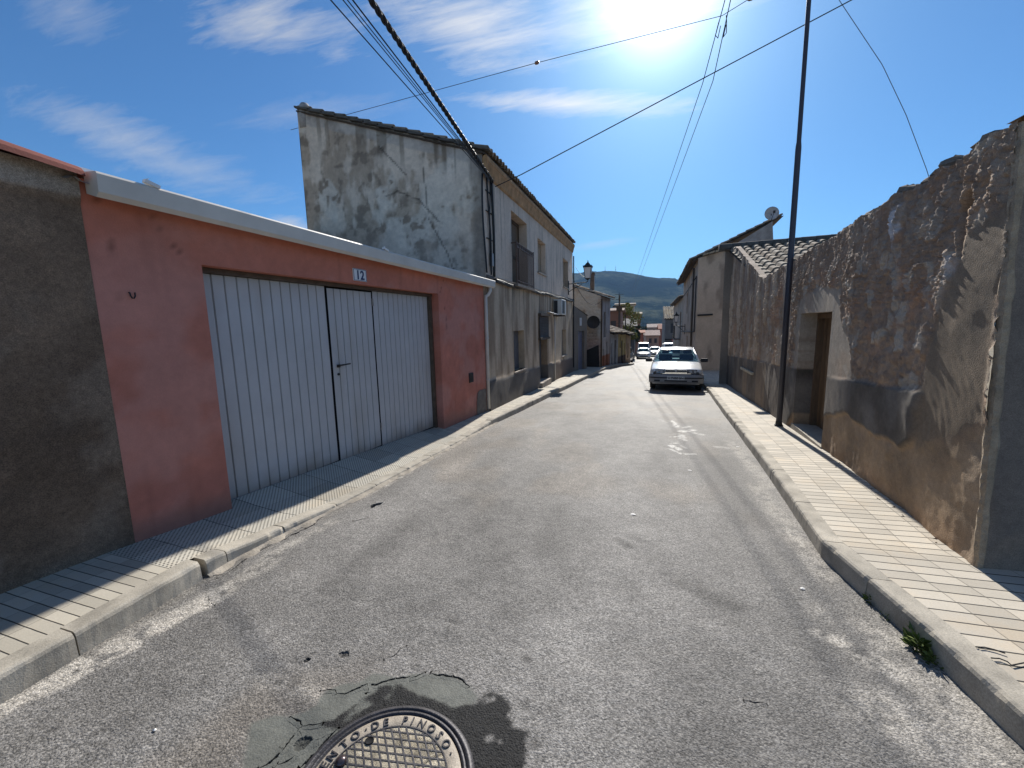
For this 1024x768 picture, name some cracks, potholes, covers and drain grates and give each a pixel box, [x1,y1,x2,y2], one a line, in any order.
crack [259,644,472,768]
manhole cover [304,705,475,768]
pothole [298,654,315,666]
pothole [334,648,354,662]
